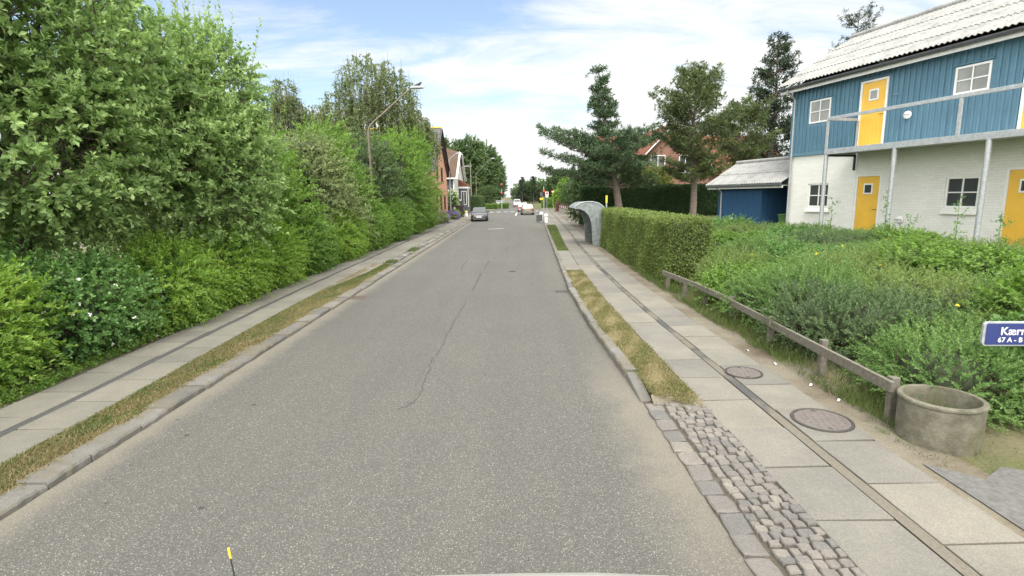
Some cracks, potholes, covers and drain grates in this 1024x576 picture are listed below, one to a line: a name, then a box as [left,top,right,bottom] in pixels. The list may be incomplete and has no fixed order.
manhole cover [790,408,855,433]
manhole cover [724,366,763,379]
crack [397,260,489,410]
